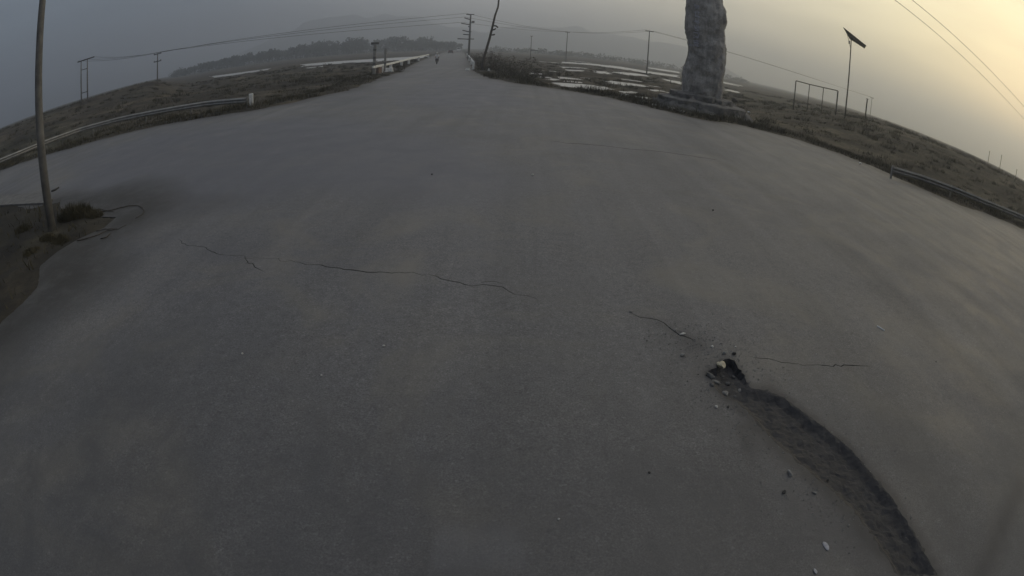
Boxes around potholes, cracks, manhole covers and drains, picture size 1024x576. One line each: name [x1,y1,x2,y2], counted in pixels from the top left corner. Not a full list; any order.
pothole [706,359,938,576]
crack [754,357,859,367]
crack [181,241,539,301]
